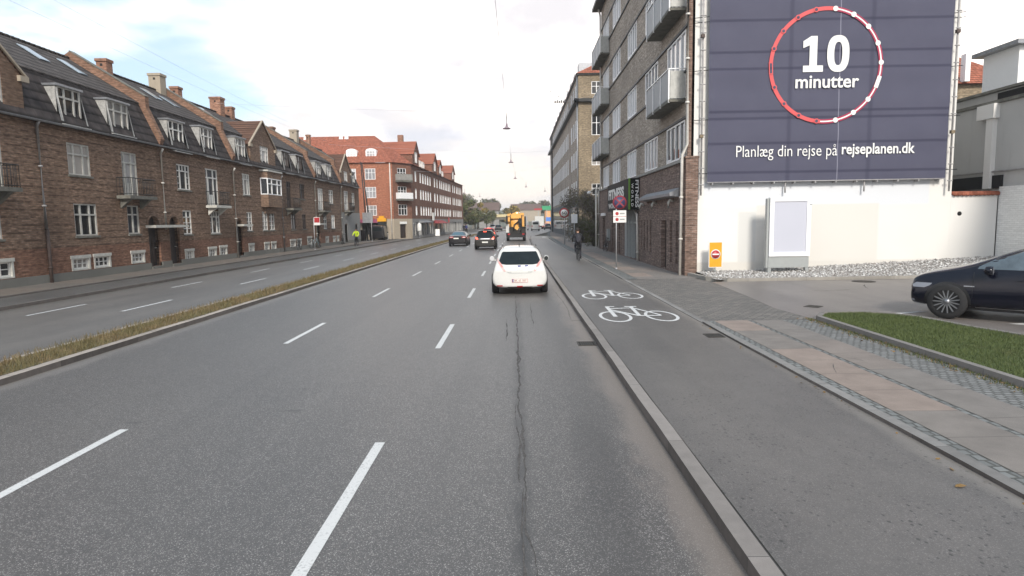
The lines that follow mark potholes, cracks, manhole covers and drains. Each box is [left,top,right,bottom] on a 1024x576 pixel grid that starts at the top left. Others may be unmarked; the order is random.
crack [506,296,538,576]
